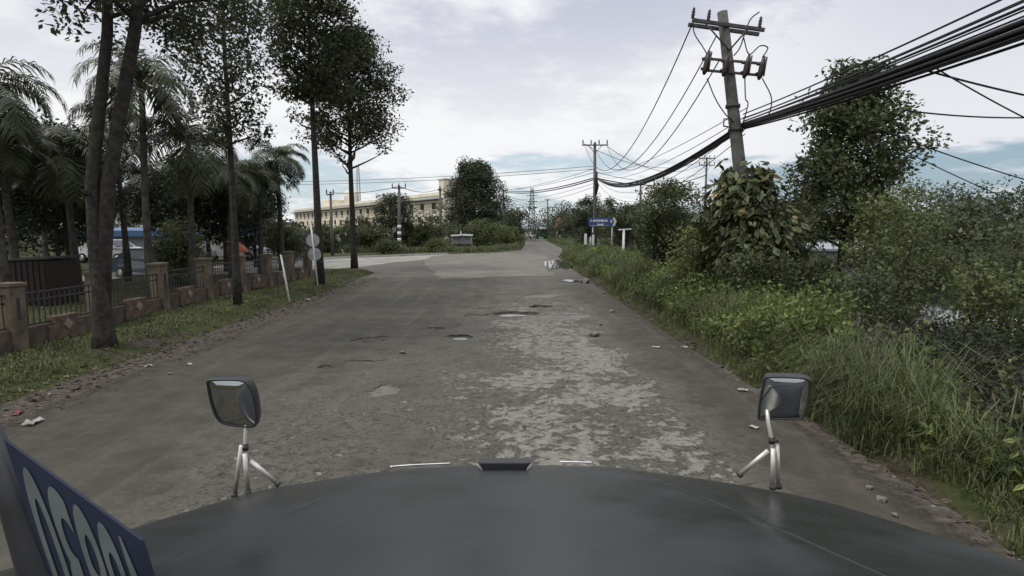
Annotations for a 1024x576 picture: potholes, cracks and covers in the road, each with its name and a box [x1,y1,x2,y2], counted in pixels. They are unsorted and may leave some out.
pothole [350,336,390,344]
pothole [367,384,401,397]
